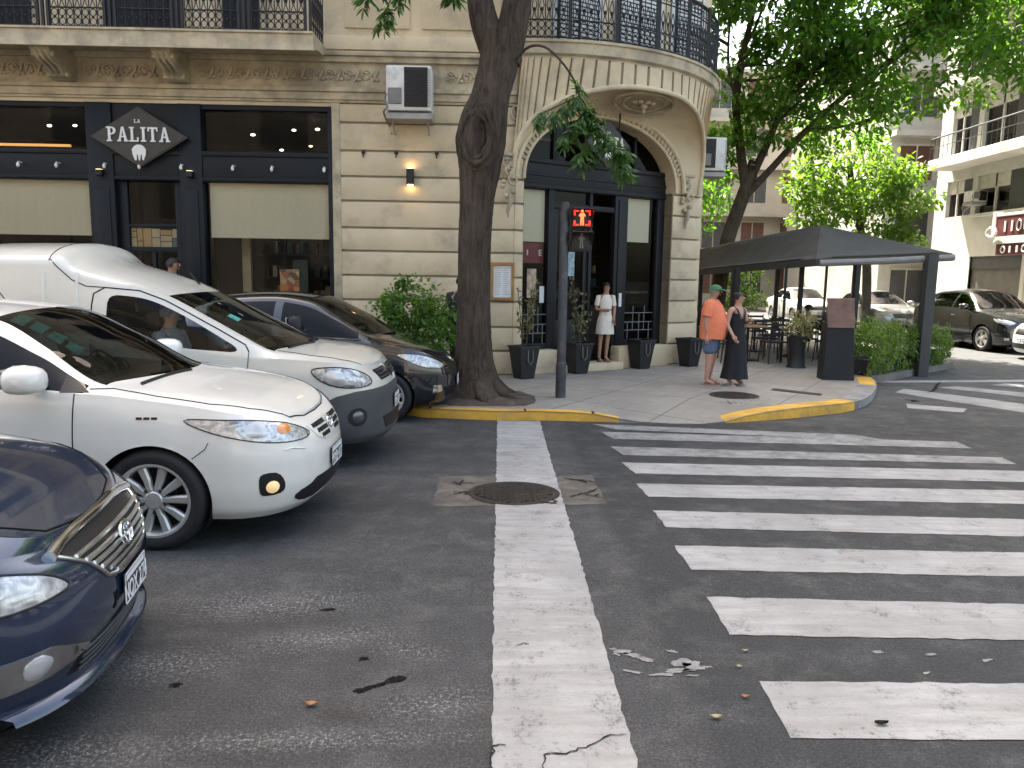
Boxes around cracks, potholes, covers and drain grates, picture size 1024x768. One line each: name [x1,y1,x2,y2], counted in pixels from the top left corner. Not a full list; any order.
crack [489,744,506,768]
manhole cover [469,481,560,505]
crack [542,734,622,768]
manhole cover [709,391,760,399]
